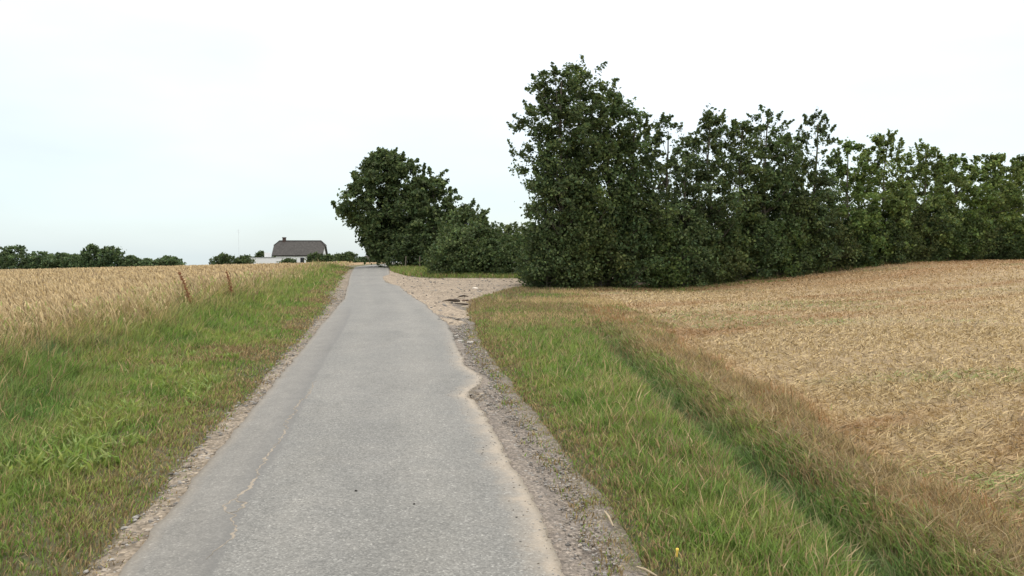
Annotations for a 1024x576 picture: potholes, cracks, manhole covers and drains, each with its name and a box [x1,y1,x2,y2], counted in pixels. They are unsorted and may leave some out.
crack [210,385,314,556]
